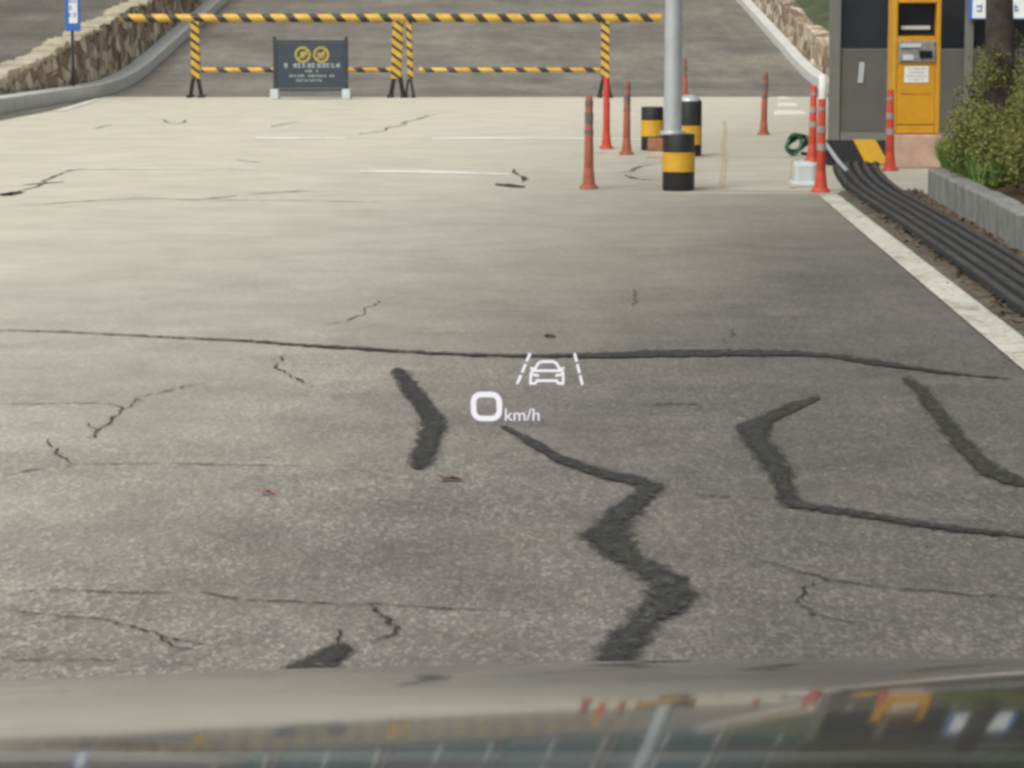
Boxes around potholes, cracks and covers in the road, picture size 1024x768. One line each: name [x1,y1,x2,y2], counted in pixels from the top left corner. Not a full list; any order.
crack [359,113,448,134]
crack [3,383,311,475]
crack [16,168,375,206]
crack [625,164,655,180]
crack [3,589,557,640]
crack [754,558,1023,624]
crack [4,608,208,649]
crack [274,355,314,386]
